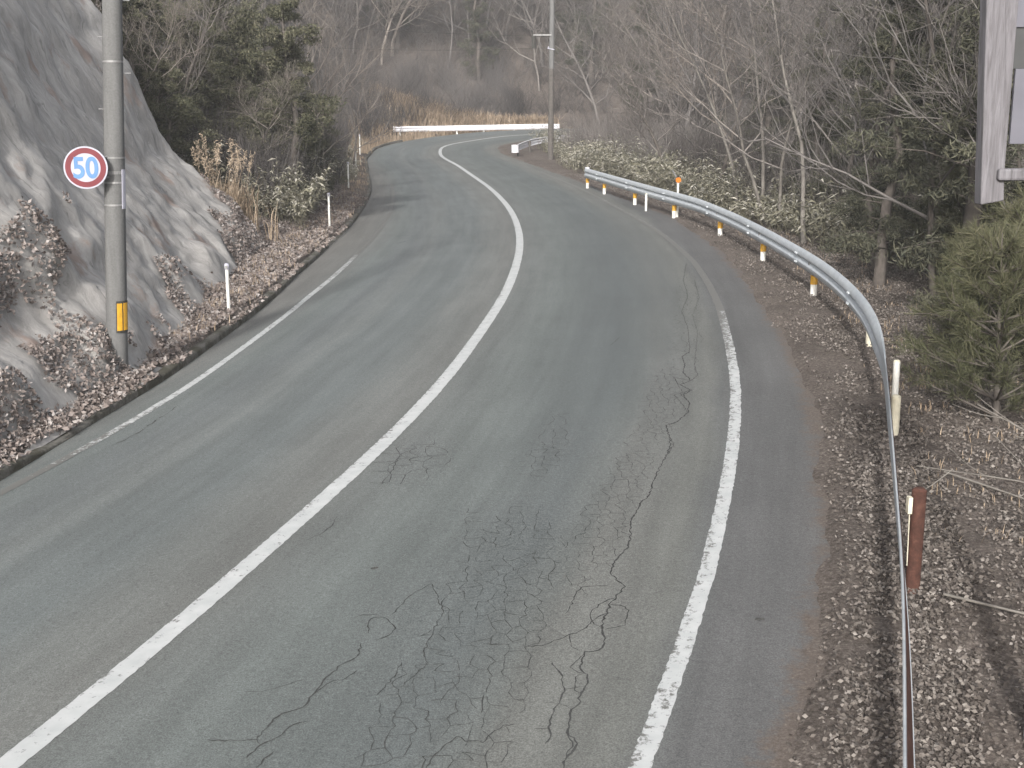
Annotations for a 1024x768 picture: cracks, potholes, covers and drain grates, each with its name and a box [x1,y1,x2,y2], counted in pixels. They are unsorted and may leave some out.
crack [208,264,699,768]
